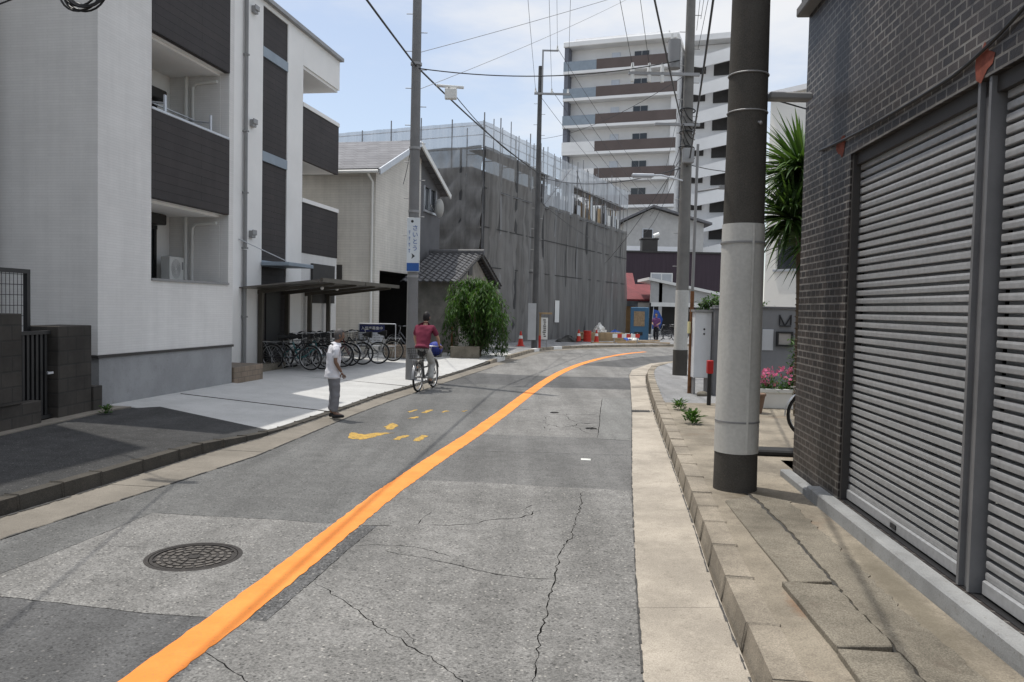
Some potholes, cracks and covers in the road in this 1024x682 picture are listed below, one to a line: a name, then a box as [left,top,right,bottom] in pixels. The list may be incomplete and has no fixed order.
crack [360,492,583,682]
manhole cover [143,542,243,572]
crack [315,583,463,682]
